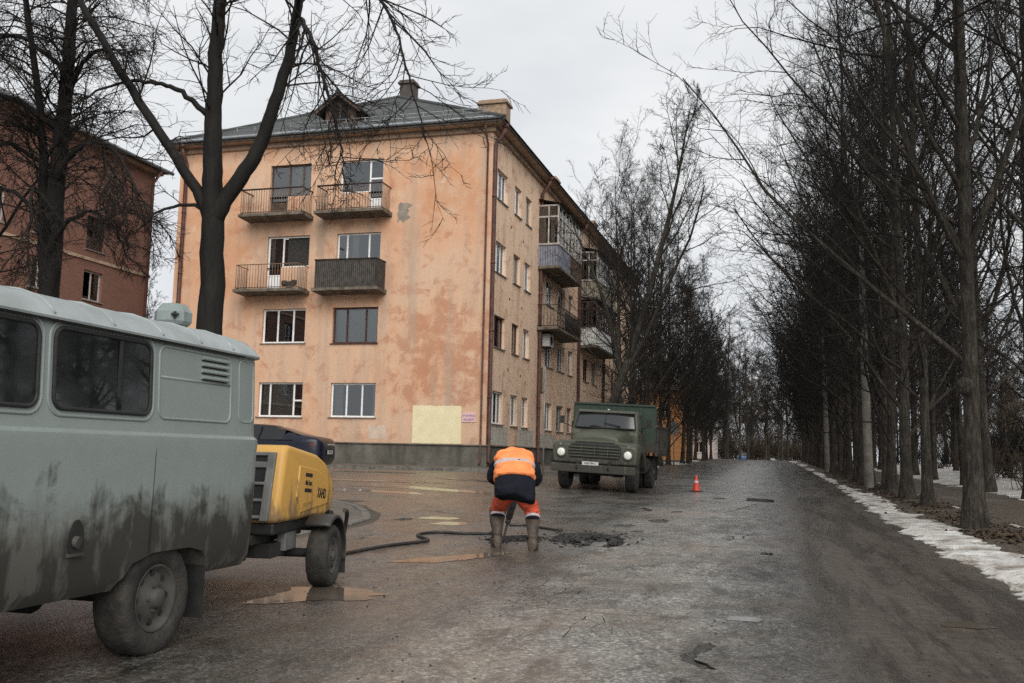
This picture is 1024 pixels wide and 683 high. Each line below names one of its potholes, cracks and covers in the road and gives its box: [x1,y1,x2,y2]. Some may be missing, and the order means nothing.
pothole [548,533,626,547]
crack [483,577,686,638]
pothole [679,642,716,670]
